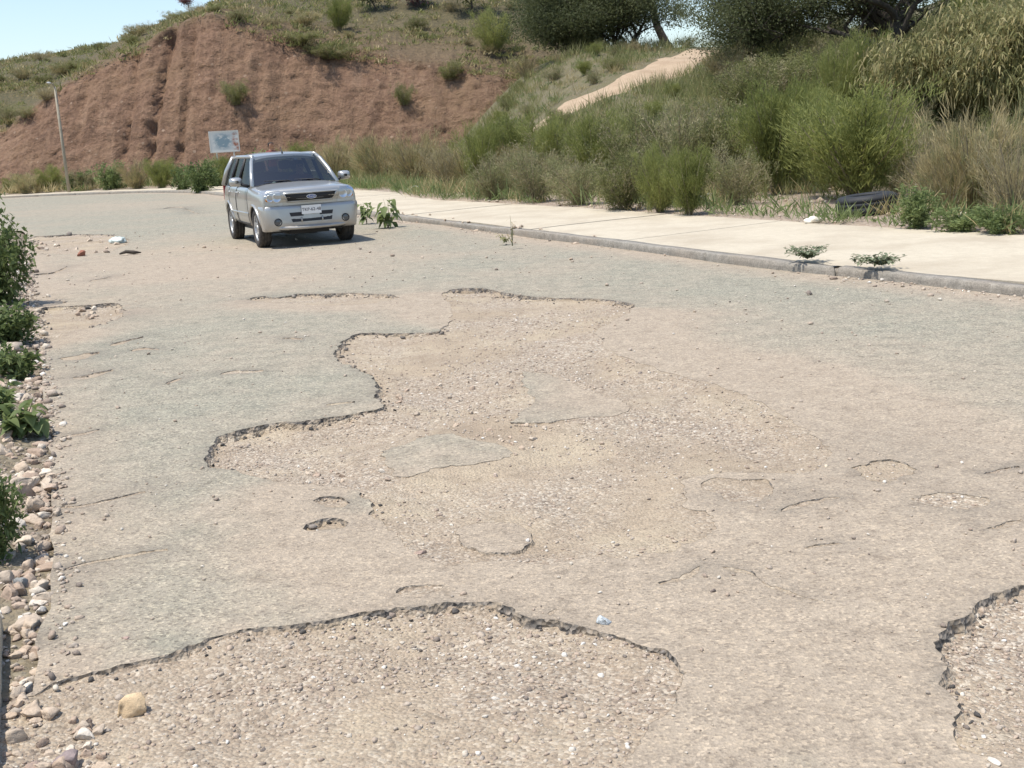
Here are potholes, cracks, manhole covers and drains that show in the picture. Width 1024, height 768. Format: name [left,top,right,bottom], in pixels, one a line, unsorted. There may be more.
crack [658,566,700,585]
pothole [203,288,832,566]
pothole [933,585,1024,759]
pothole [850,459,917,483]
pothole [912,492,990,510]
pothole [38,303,126,341]
crack [781,497,839,512]
pothole [0,601,687,768]
crack [986,519,1022,529]
crack [59,491,145,508]
